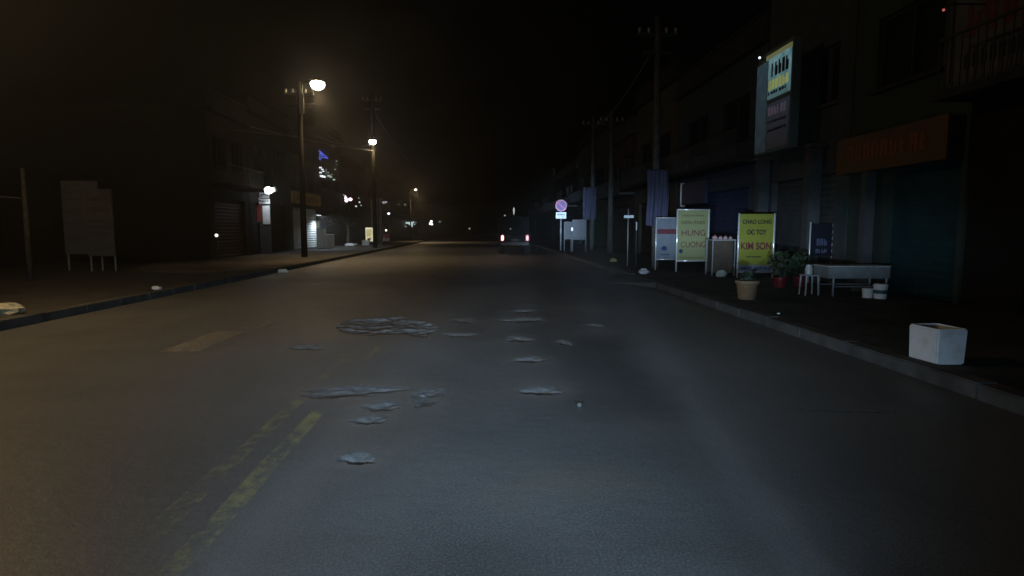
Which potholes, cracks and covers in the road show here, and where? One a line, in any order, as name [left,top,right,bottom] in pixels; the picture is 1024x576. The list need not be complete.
pothole [516,386,562,395]
pothole [336,451,377,465]
pothole [346,415,389,425]
pothole [334,316,440,338]
pothole [409,387,447,408]
pothole [300,385,420,399]
pothole [361,400,403,412]
